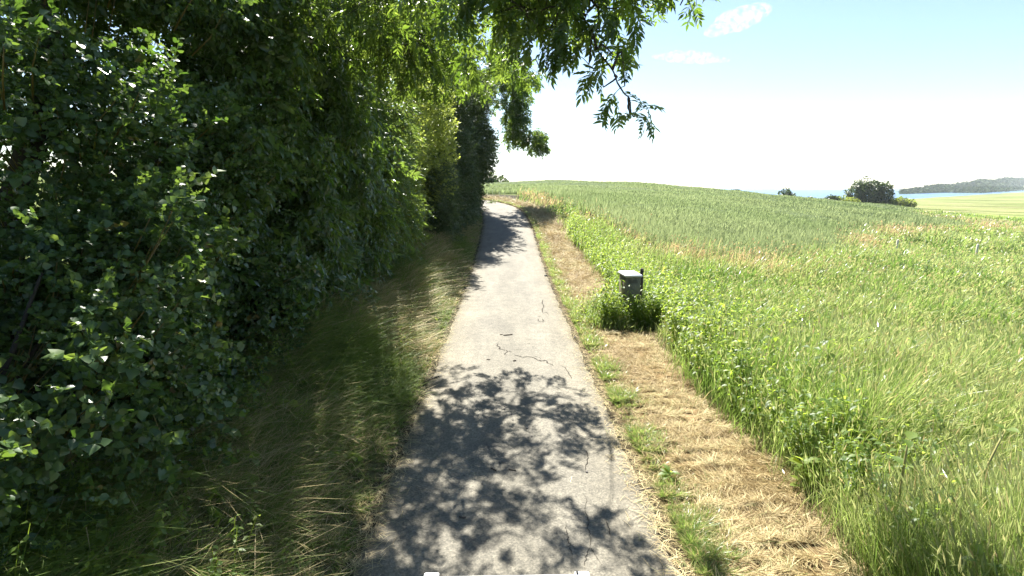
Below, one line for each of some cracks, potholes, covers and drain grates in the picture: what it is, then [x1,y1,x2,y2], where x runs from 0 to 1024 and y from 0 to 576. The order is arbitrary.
crack [565,493,611,565]
